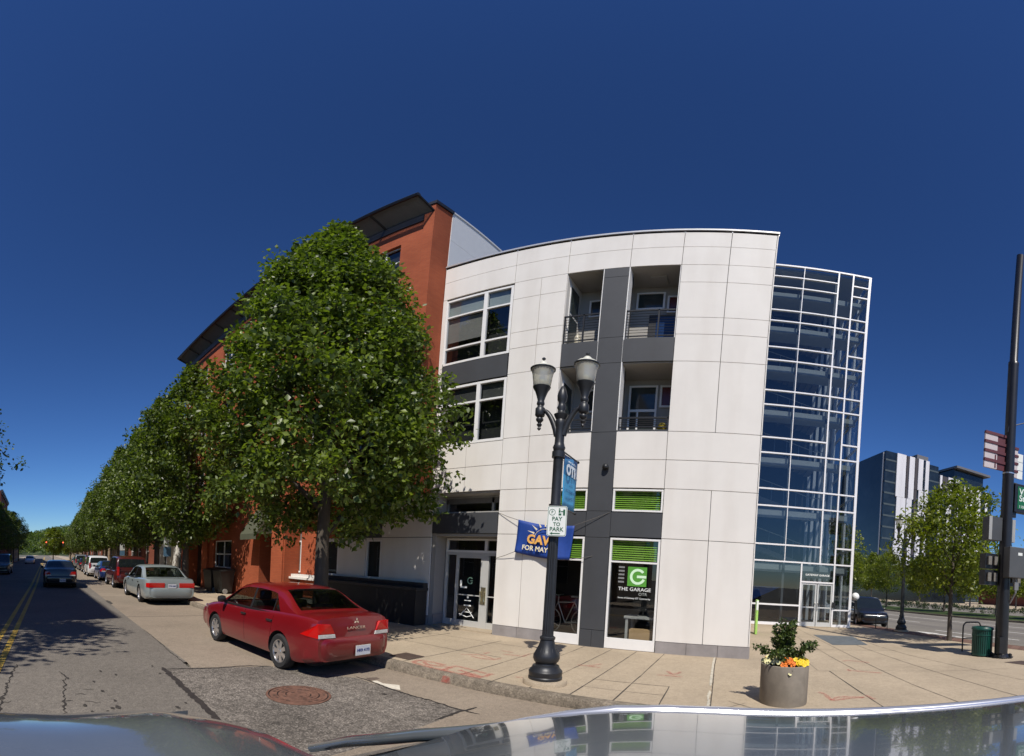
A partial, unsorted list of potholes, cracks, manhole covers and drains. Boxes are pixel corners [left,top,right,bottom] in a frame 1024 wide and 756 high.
utility cover [389,652,425,660]
crack [59,671,98,713]
crack [0,664,23,710]
manhole cover [266,685,331,705]
